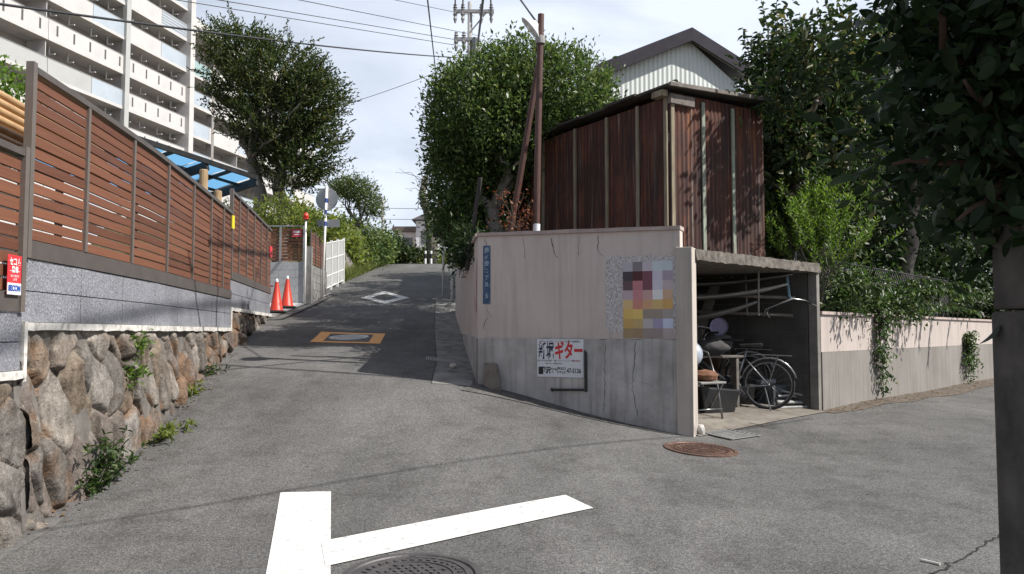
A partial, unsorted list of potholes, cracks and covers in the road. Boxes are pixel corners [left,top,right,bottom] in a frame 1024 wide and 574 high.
drain grate [705,429,761,440]
manhole cover [342,552,483,574]
manhole cover [663,441,739,458]
crack [928,535,999,574]
